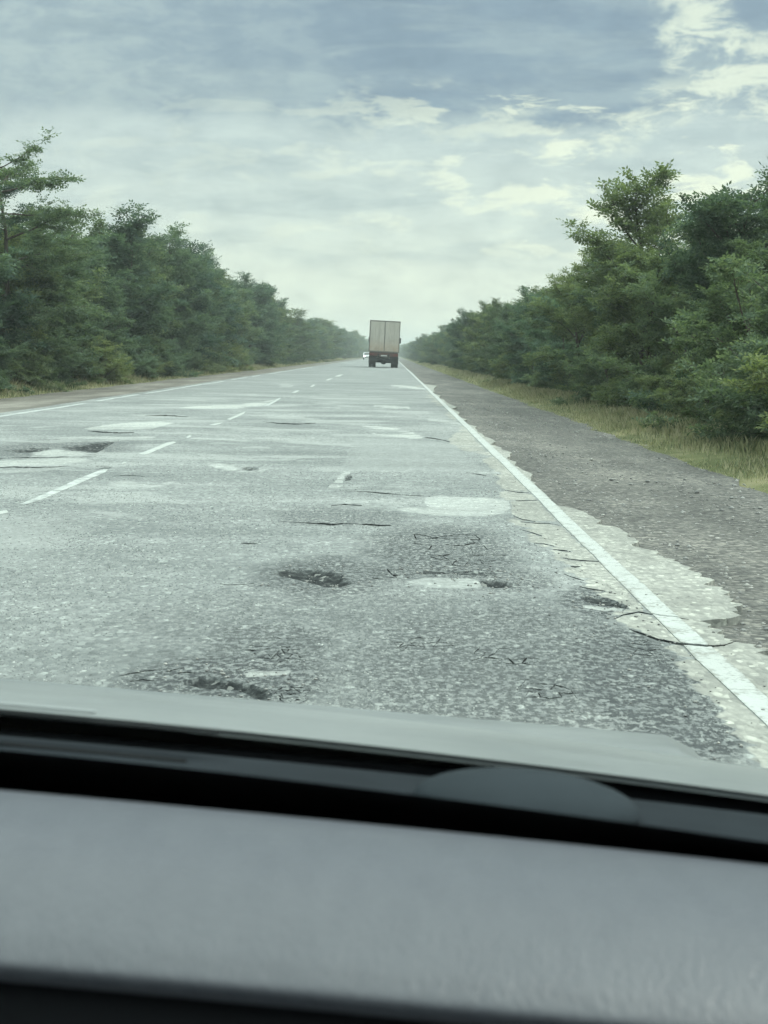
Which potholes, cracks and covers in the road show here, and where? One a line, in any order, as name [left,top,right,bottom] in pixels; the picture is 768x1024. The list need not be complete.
crack [414,534,506,566]
pothole [269,568,354,588]
pothole [581,596,629,609]
crack [474,647,580,698]
crack [617,611,736,656]
pothole [57,439,120,453]
pothole [173,674,273,701]
